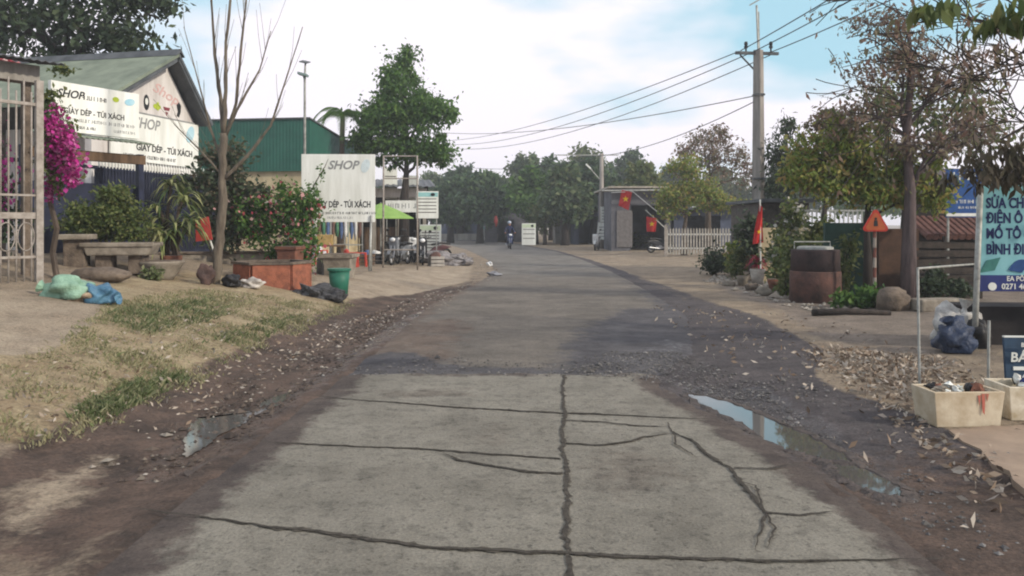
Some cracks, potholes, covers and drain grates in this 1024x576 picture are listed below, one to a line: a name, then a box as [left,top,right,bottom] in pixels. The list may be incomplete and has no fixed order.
crack [133,420,943,563]
pothole [817,460,923,503]
pothole [679,393,871,466]
